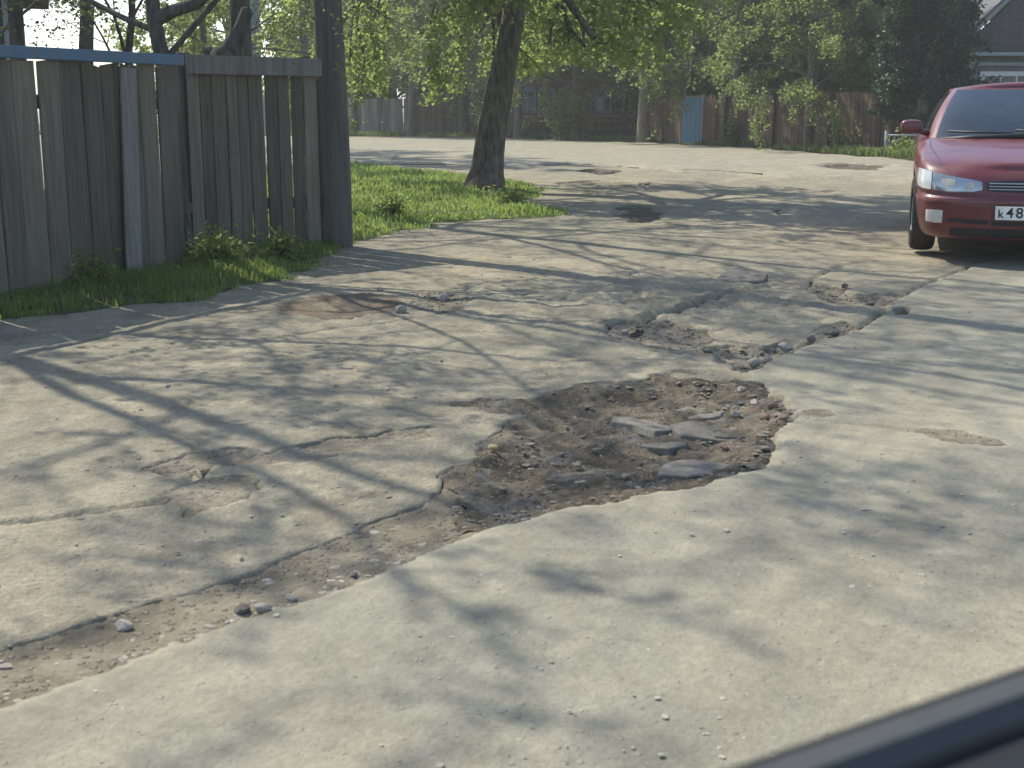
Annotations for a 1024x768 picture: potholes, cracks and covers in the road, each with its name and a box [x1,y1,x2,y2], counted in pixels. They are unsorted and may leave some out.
pothole [809,323,858,339]
pothole [438,375,795,533]
pothole [698,345,792,373]
pothole [807,285,904,307]
pothole [606,322,713,351]
